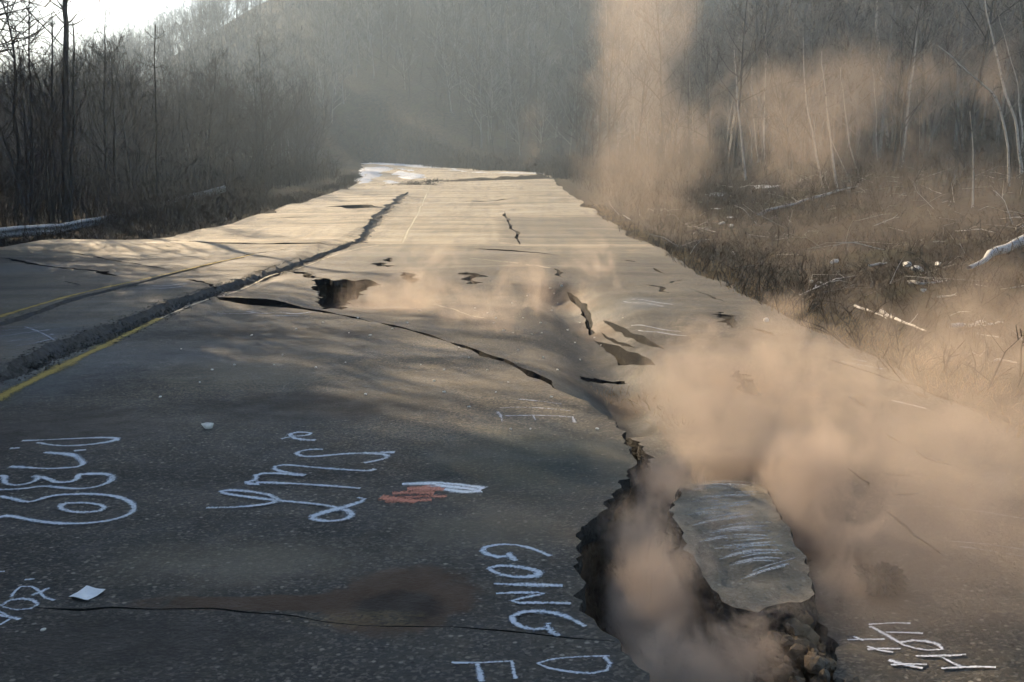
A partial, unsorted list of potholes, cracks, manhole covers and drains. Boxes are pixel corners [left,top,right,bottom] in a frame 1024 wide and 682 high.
pothole [311,278,381,310]
crack [580,320,665,384]
crack [6,252,164,285]
